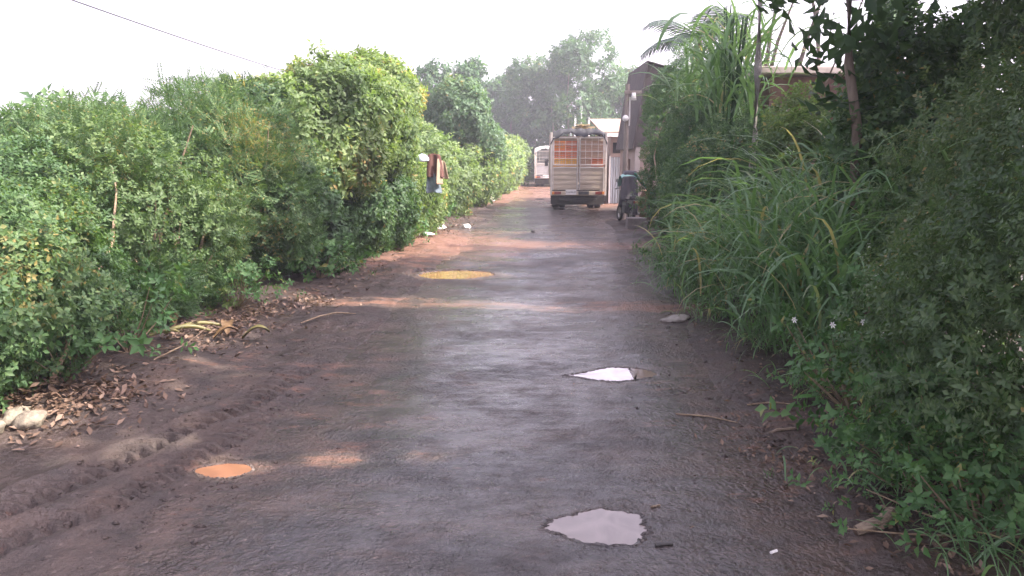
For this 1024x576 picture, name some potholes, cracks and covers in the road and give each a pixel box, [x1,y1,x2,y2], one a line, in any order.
pothole [564,366,661,382]
pothole [537,507,654,548]
pothole [191,462,255,479]
